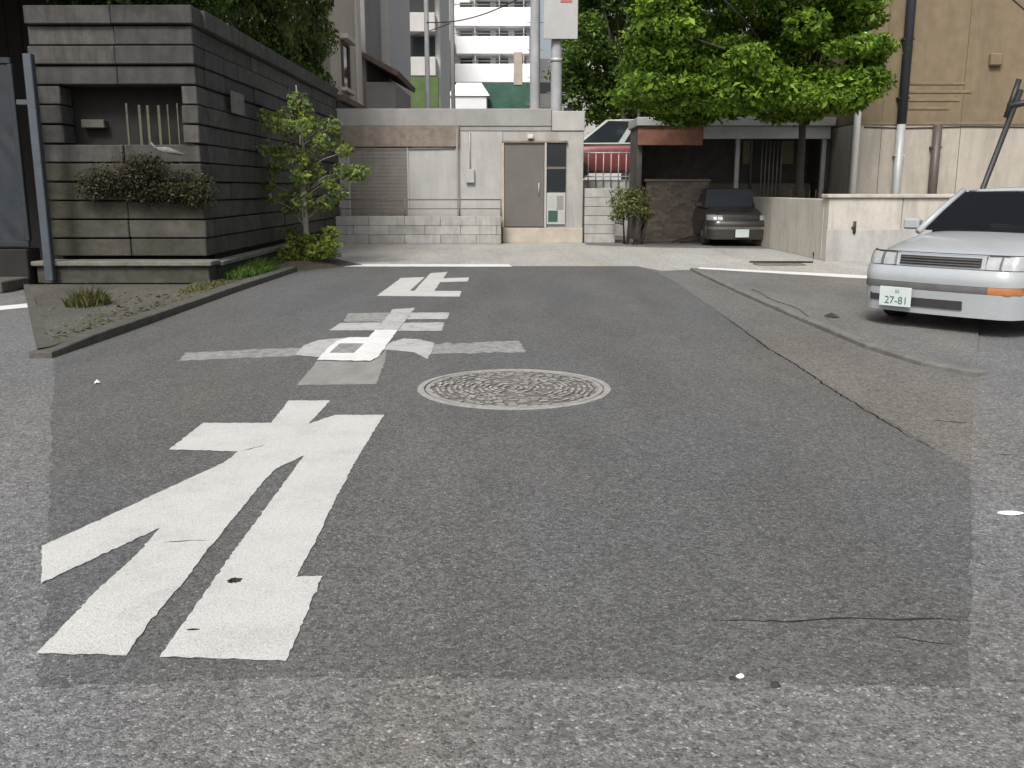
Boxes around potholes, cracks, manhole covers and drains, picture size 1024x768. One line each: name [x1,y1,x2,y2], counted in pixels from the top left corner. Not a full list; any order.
manhole cover [417,369,611,410]
crack [721,617,960,645]
